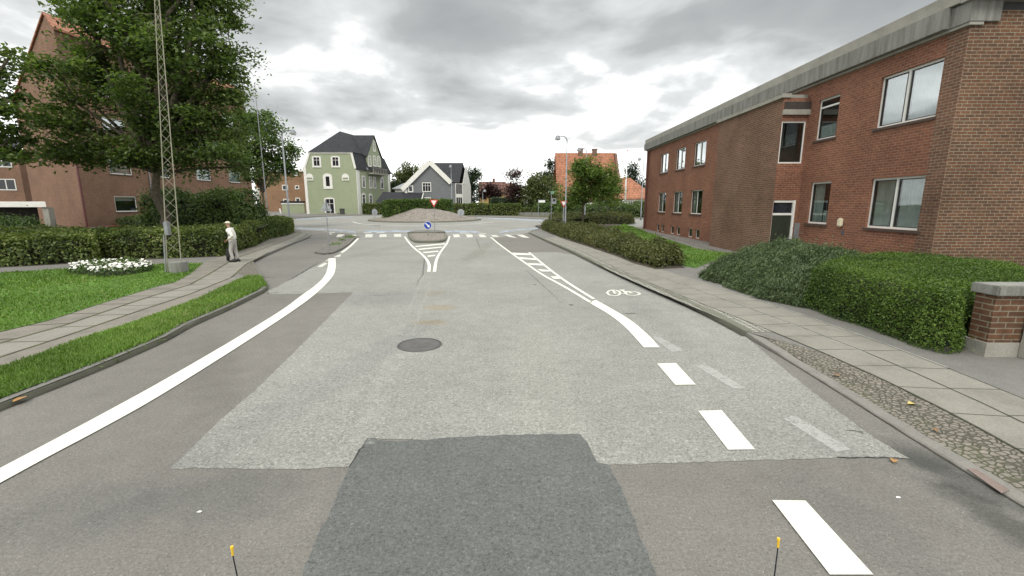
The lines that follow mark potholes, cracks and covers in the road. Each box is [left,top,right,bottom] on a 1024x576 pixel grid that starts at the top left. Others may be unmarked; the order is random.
manhole cover [397,338,442,352]
